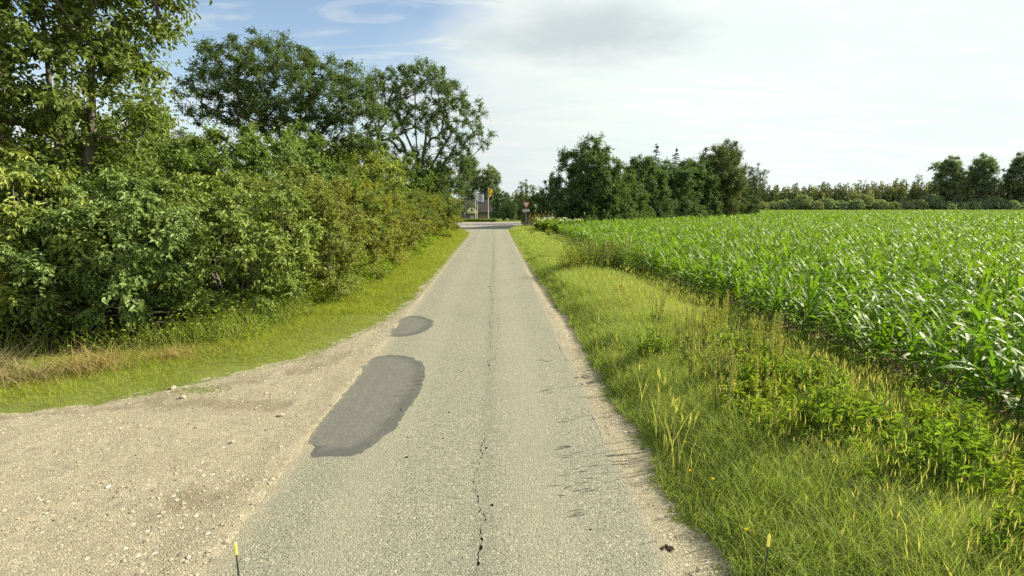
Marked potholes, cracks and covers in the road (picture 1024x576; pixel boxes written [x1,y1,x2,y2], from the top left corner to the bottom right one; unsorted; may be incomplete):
crack [473,438,488,568]
